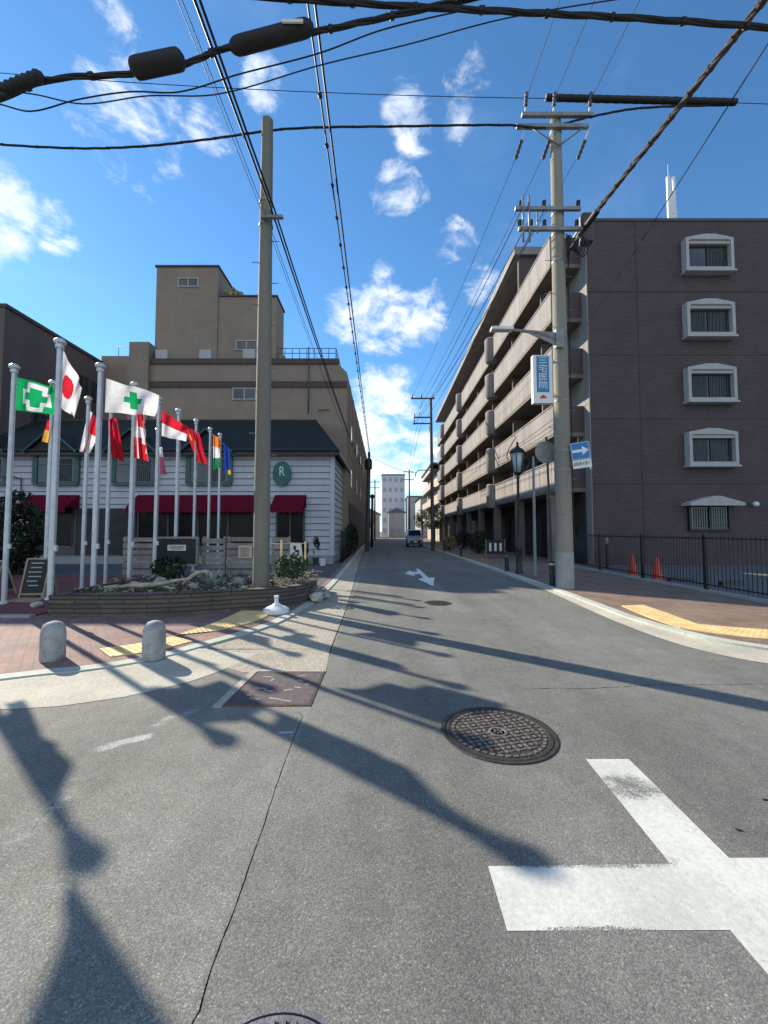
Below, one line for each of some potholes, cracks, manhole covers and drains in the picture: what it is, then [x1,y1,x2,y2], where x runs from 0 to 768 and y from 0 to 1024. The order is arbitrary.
manhole cover [212,669,324,708]
manhole cover [233,1006,332,1024]
manhole cover [440,707,560,765]
